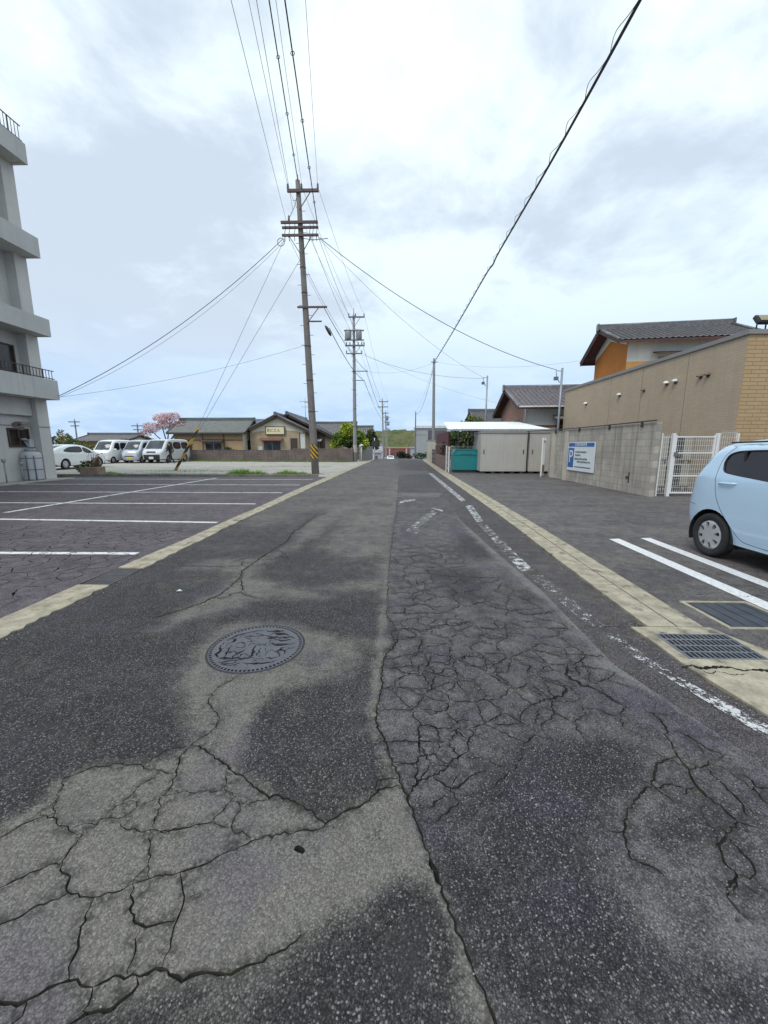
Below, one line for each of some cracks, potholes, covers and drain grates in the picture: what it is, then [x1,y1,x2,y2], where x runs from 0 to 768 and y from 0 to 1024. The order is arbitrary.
crack [0,501,628,1024]
manhole cover [205,625,305,674]
drain grate [654,633,768,660]
drain grate [81,568,141,585]
crack [608,710,768,919]
crack [682,665,768,675]
